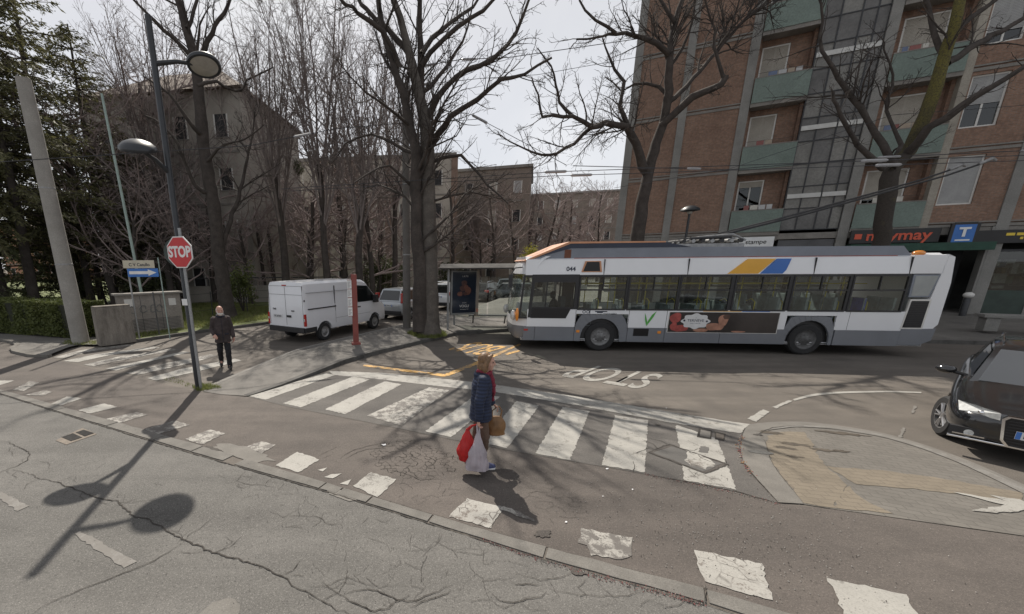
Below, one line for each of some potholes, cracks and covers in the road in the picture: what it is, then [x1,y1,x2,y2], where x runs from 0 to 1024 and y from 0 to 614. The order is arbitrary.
drain grate [56,428,96,444]
manhole cover [697,428,712,439]
crack [1,440,682,614]
